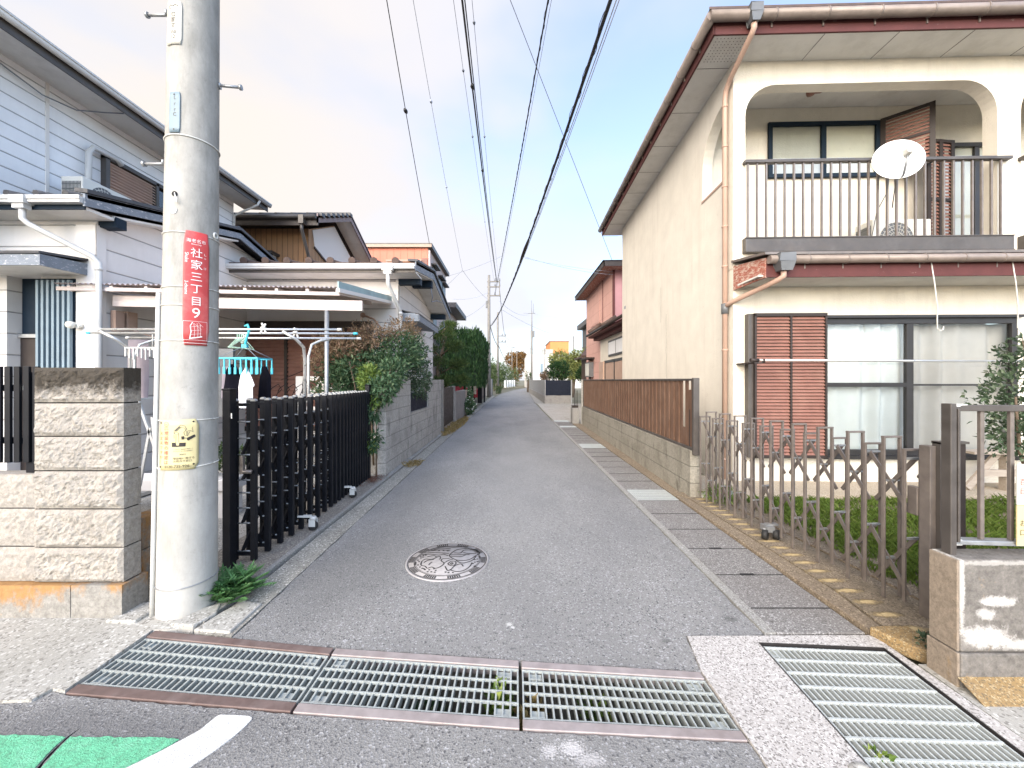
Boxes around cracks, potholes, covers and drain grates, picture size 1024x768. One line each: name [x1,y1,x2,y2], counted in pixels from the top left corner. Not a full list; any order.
manhole cover [405,543,489,582]
drain grate [66,631,333,714]
drain grate [521,661,748,743]
drain grate [763,646,1024,768]
drain grate [293,648,519,731]
